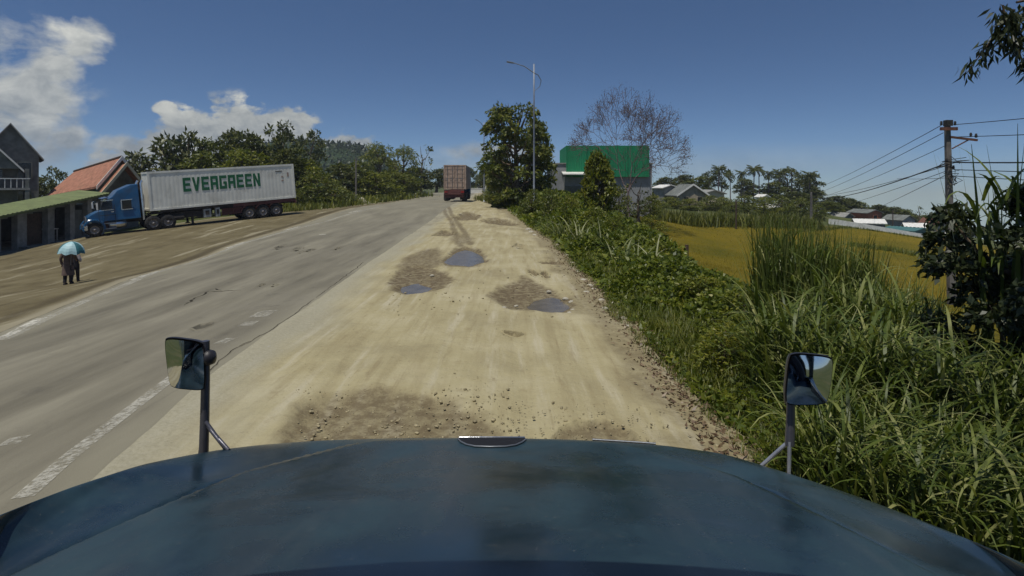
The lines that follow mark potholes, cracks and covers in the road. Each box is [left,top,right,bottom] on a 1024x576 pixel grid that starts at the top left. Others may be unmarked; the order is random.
pothole [435,244,492,269]
pothole [384,265,459,297]
pothole [501,330,526,338]
pothole [482,275,584,315]
crack [185,263,362,371]
